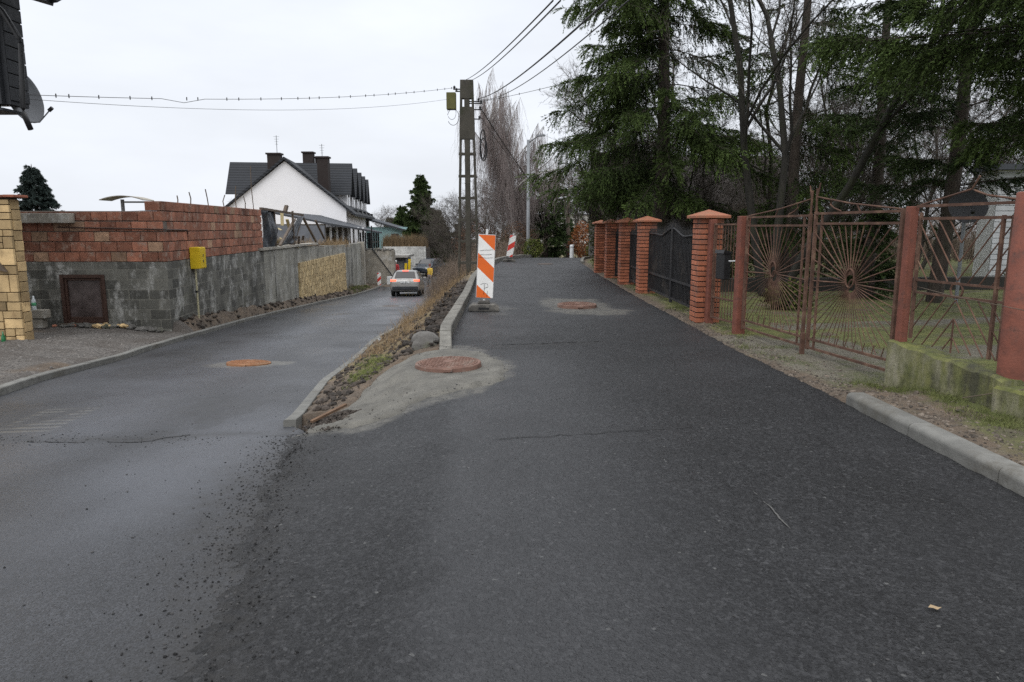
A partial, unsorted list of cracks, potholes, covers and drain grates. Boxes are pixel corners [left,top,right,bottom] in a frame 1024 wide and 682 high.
manhole cover [415,356,481,373]
manhole cover [226,359,271,367]
manhole cover [557,301,597,309]
crack [499,426,698,439]
